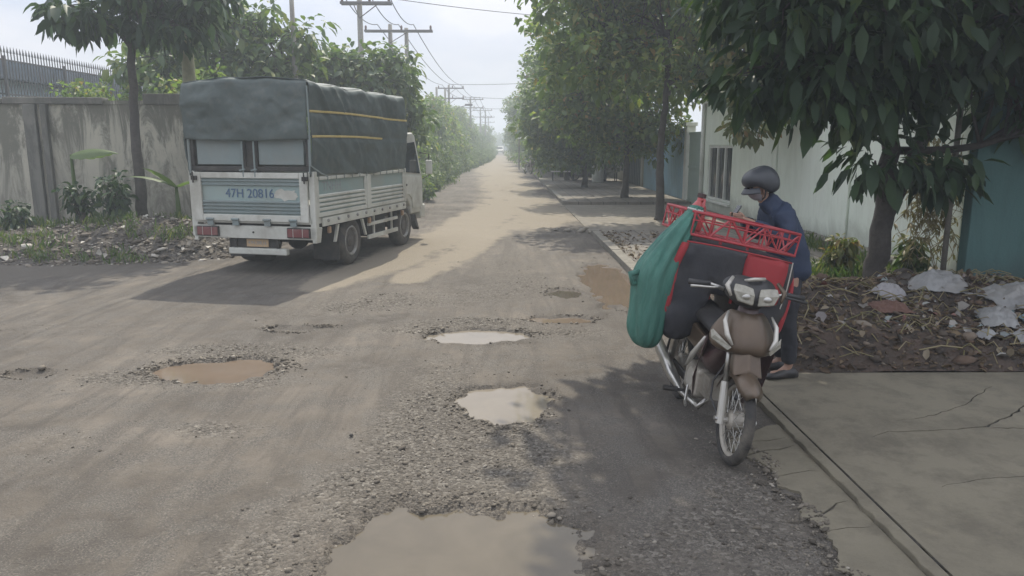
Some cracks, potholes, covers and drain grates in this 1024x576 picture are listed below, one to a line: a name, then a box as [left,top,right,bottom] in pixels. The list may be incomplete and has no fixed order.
pothole [570,257,631,315]
pothole [0,365,68,380]
pothole [263,479,640,576]
pothole [254,323,343,334]
pothole [406,325,549,344]
pothole [439,373,572,442]
pothole [539,287,585,299]
pothole [123,352,307,386]
pothole [518,313,604,325]
